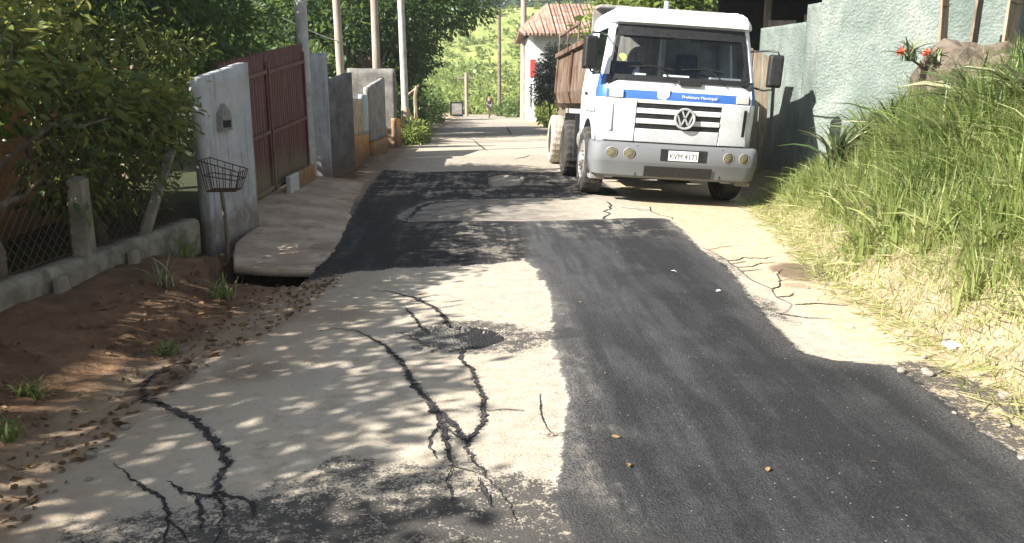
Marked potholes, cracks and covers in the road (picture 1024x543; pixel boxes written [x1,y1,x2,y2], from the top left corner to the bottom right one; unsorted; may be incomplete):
crack [602,202,673,219]
crack [113,362,256,543]
pothole [411,326,504,350]
crack [319,290,551,523]
